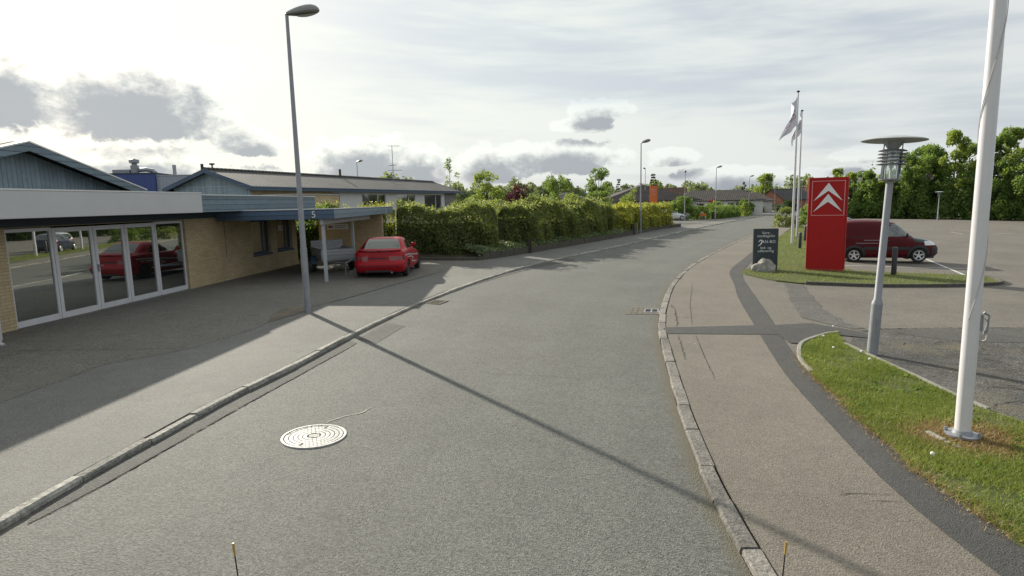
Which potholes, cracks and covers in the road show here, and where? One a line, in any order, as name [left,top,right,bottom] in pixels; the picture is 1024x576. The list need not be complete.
manhole cover [280,424,347,449]
drain grate [626,307,660,315]
crack [27,343,356,524]
